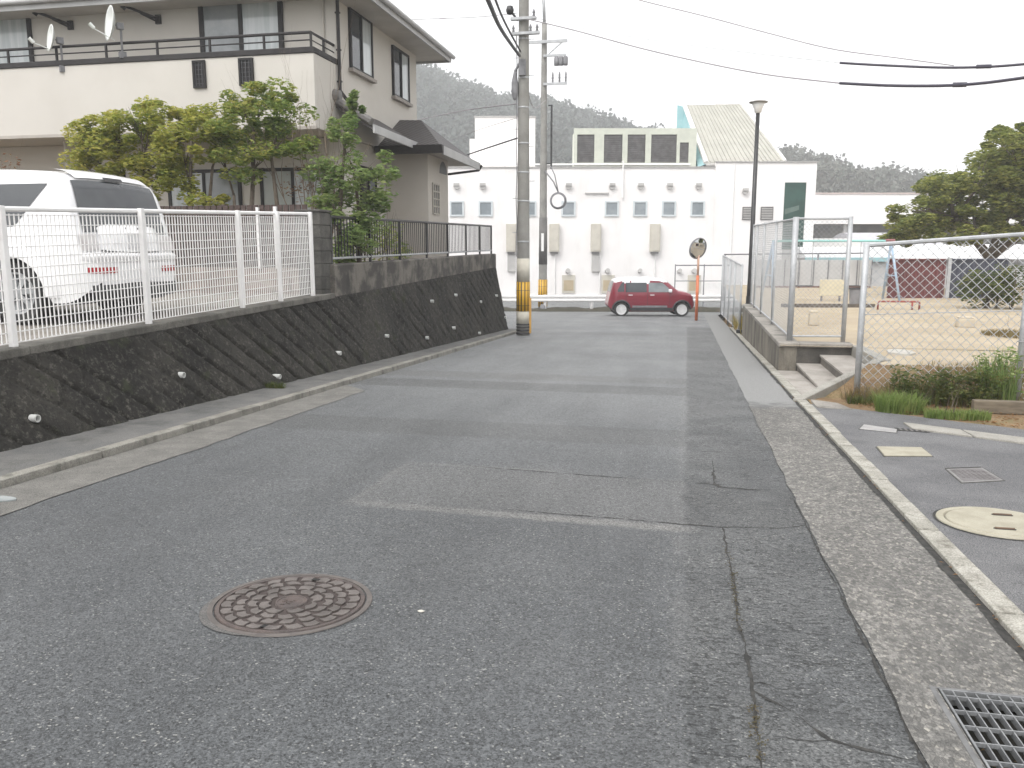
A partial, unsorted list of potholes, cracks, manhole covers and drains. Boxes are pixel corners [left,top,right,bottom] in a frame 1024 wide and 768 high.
manhole cover [199,574,372,637]
manhole cover [945,467,1005,483]
manhole cover [876,446,934,457]
manhole cover [932,506,1024,541]
drain grate [929,686,1024,768]
crack [508,500,927,768]
crack [701,451,757,490]
